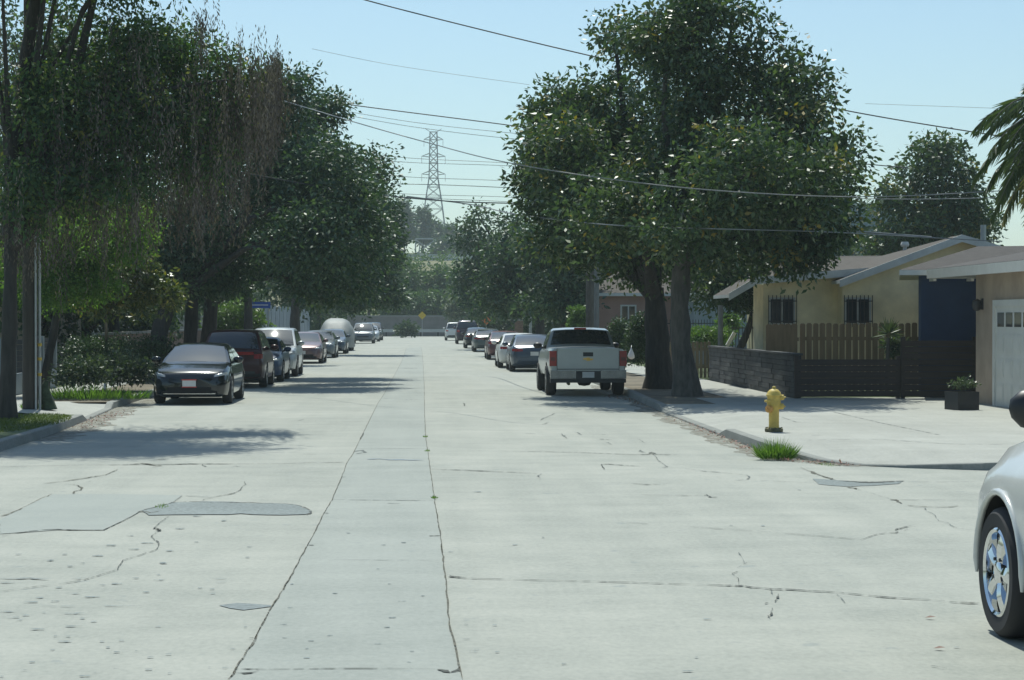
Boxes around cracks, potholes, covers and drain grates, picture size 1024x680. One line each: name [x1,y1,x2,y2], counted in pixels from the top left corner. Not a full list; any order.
crack [685,467,957,528]
crack [1,466,342,676]
